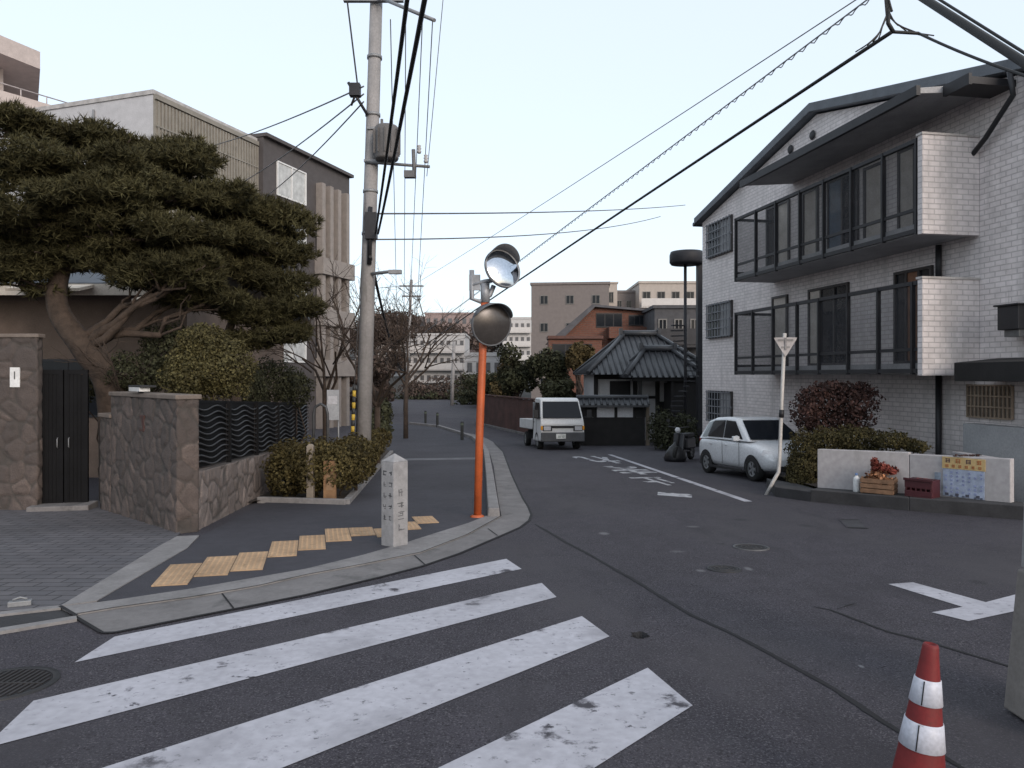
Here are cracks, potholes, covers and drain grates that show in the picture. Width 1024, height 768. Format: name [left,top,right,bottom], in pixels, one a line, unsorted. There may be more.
manhole cover [707,565,742,573]
pothole [631,631,650,639]
manhole cover [733,543,770,551]
